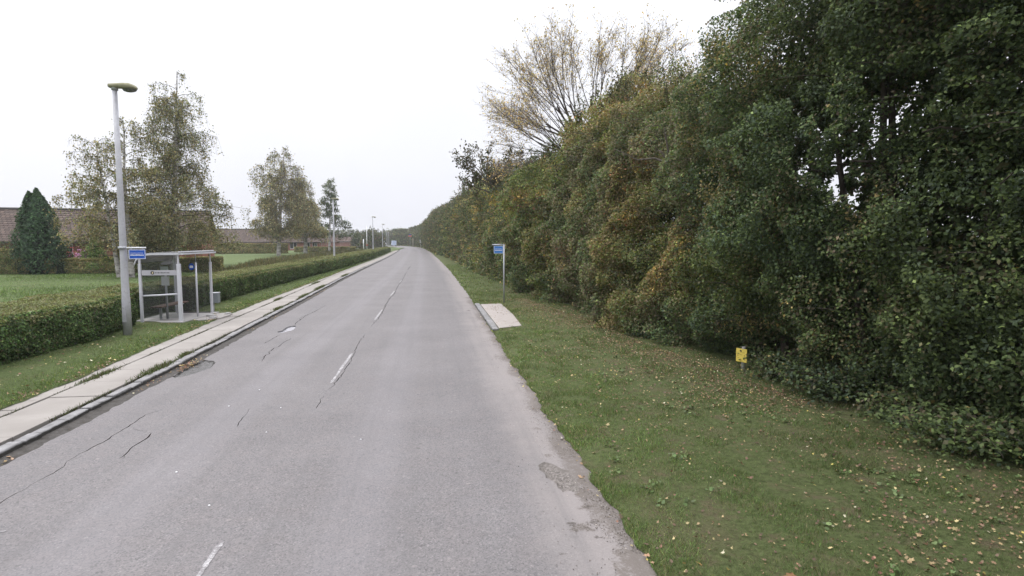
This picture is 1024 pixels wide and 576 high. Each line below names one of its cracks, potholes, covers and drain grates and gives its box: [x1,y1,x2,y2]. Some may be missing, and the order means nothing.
crack [0,413,151,503]
pothole [174,360,216,378]
